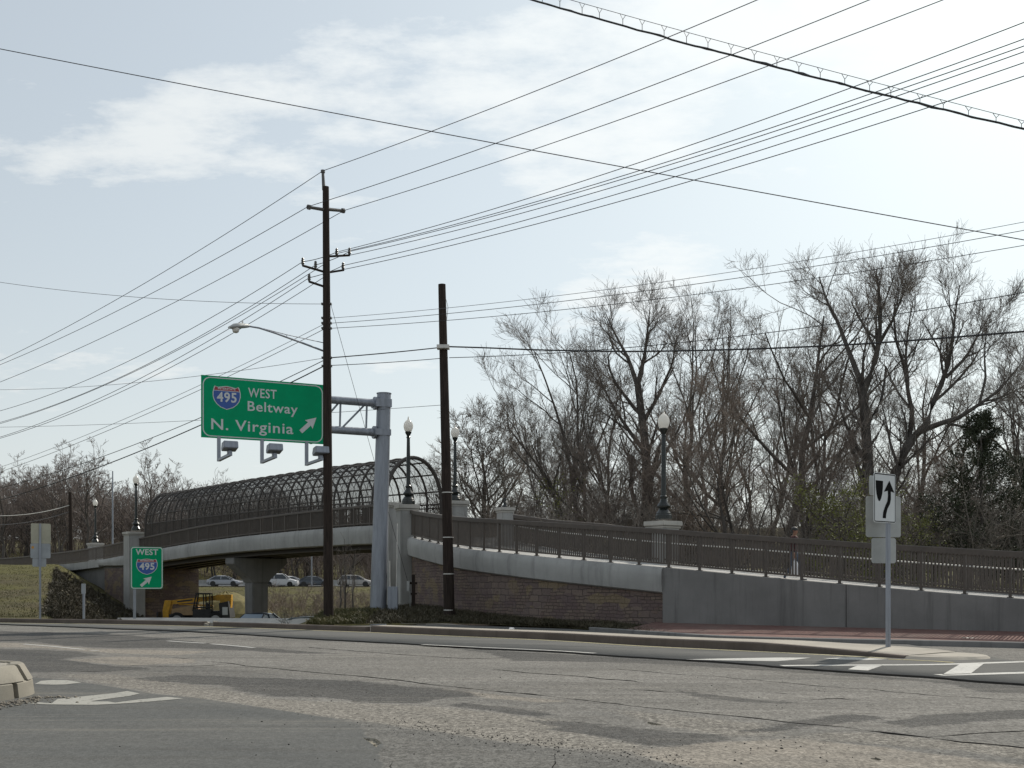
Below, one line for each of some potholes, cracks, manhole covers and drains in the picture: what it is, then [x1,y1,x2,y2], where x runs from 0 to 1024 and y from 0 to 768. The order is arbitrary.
crack [182,658,1024,748]
